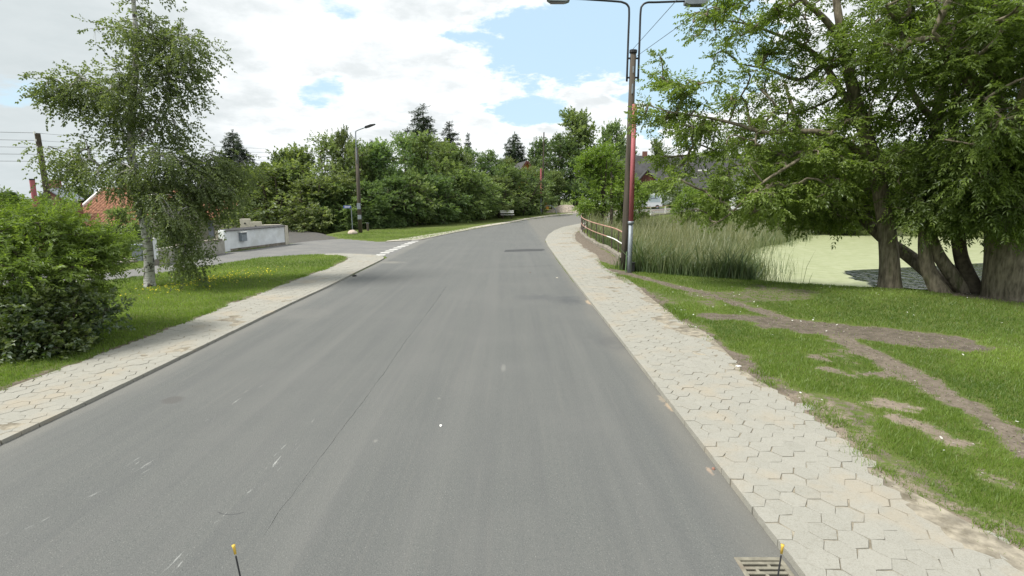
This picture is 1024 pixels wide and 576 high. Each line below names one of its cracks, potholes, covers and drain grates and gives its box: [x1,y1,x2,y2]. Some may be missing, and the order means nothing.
drain grate [734,557,795,576]
crack [263,291,443,536]
